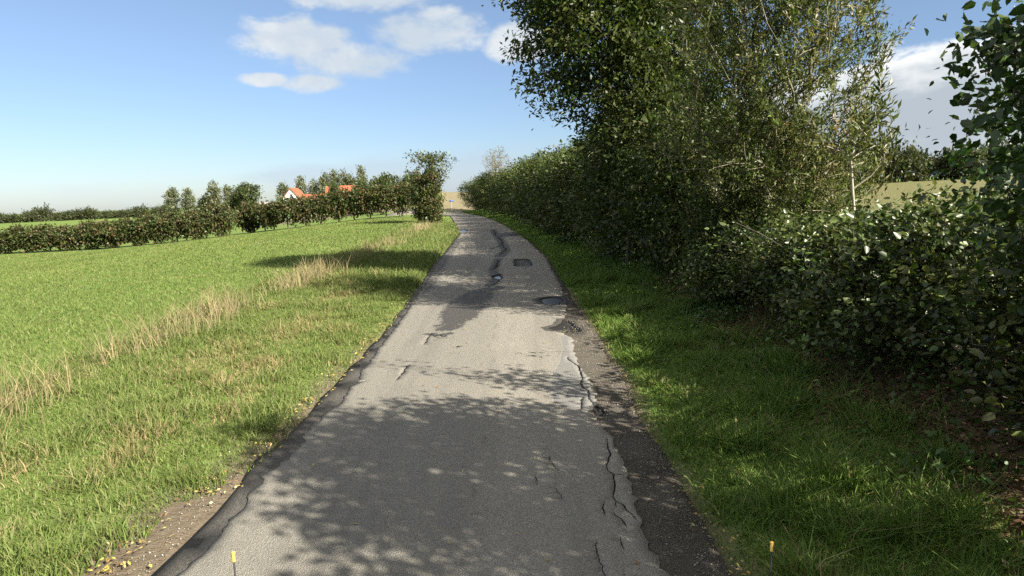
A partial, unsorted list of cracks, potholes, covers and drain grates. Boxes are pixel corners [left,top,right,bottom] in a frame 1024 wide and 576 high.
crack [602,437,634,549]
pothole [549,319,579,333]
crack [567,357,596,412]
pothole [532,297,569,305]
pothole [508,259,535,267]
crack [466,229,507,286]
